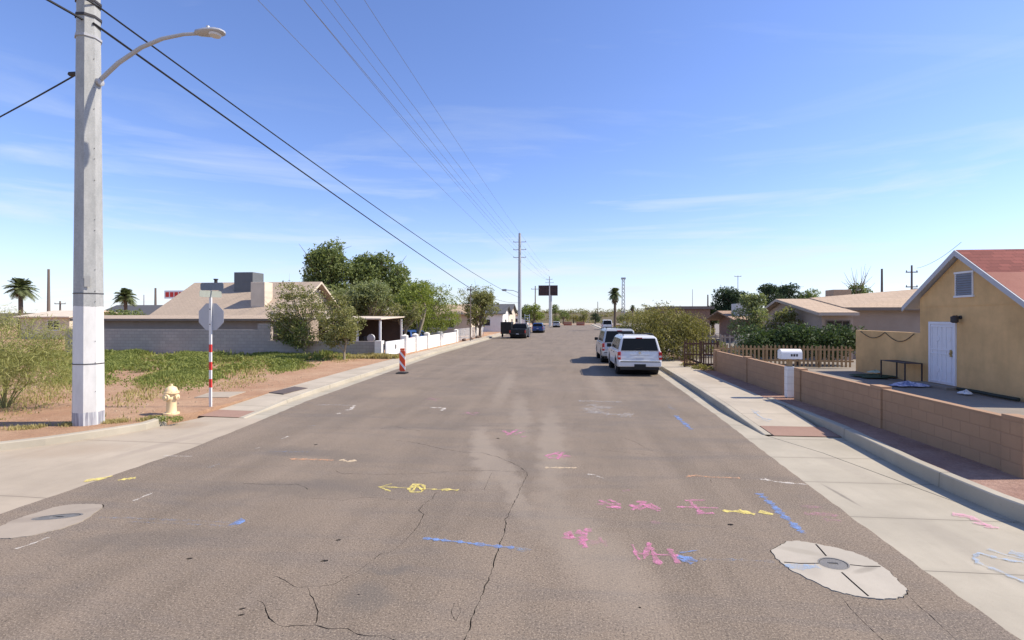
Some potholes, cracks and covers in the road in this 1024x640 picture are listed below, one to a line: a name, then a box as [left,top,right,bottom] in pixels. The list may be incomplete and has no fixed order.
manhole cover [771,541,908,600]
crack [257,494,435,640]
crack [342,442,528,640]
